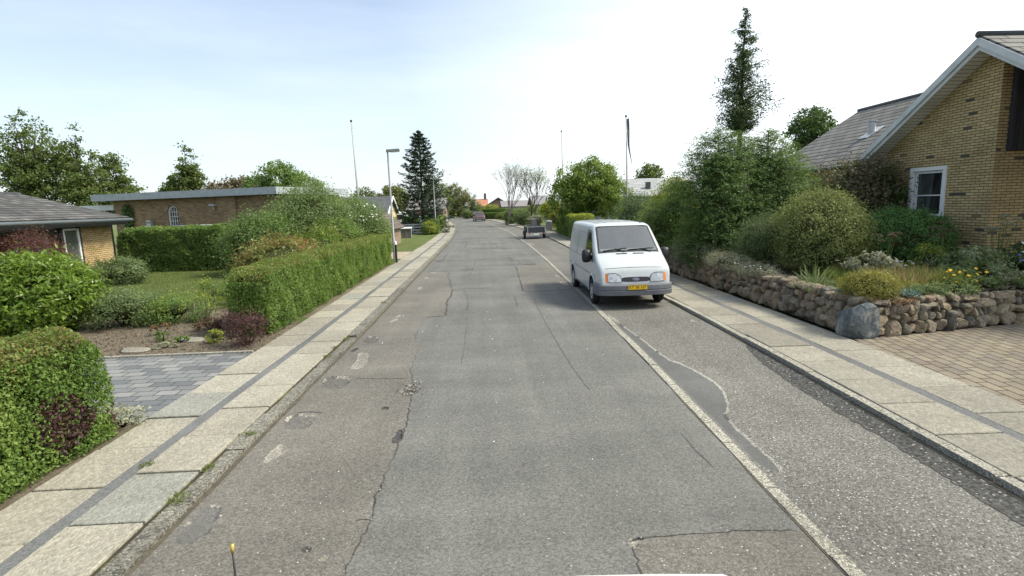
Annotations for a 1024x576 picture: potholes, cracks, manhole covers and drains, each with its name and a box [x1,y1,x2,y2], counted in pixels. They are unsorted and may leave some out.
pothole [400,384,421,396]
crack [346,241,590,566]
crack [631,529,792,574]
pothole [391,429,404,444]
